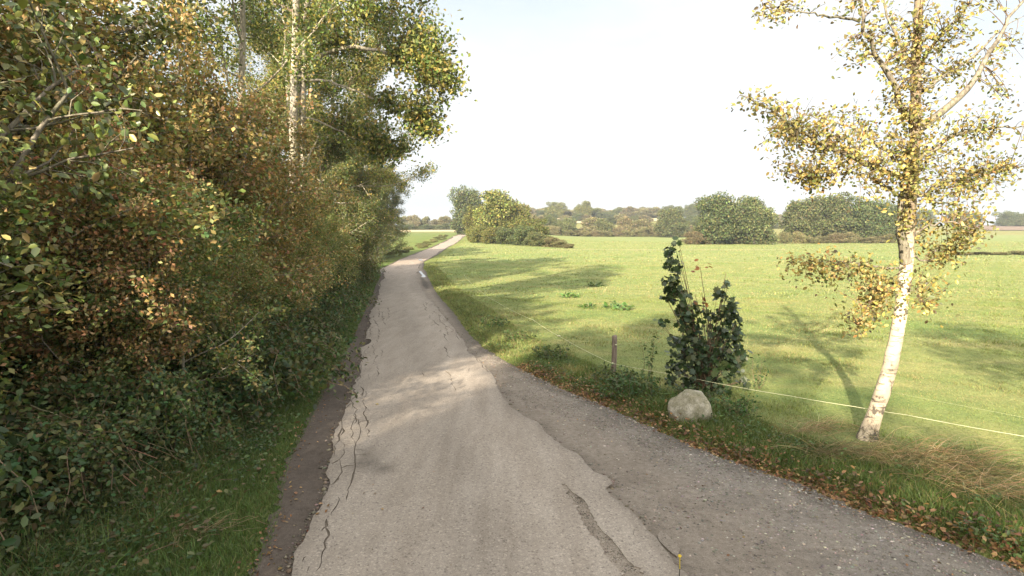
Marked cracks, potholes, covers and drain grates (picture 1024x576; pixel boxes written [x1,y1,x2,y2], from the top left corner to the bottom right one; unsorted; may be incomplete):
crack [302,308,390,571]
crack [562,484,644,576]
crack [423,302,458,390]
